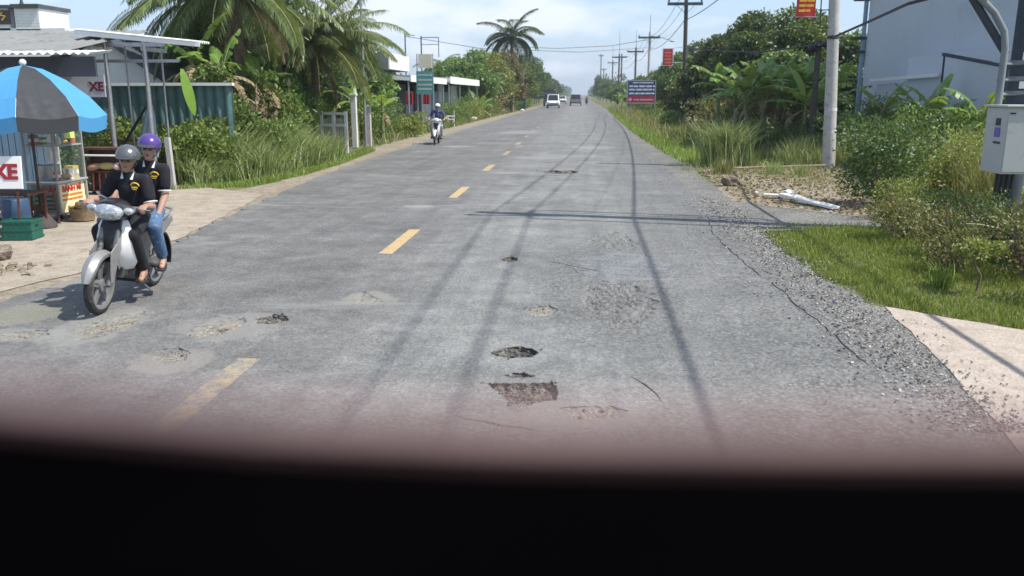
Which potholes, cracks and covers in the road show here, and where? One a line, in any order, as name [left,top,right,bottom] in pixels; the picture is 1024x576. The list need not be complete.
crack [707,217,872,368]
crack [631,376,662,402]
pothole [481,380,559,406]
pothole [151,346,191,364]
pothole [490,346,543,360]
pothole [256,313,289,324]
